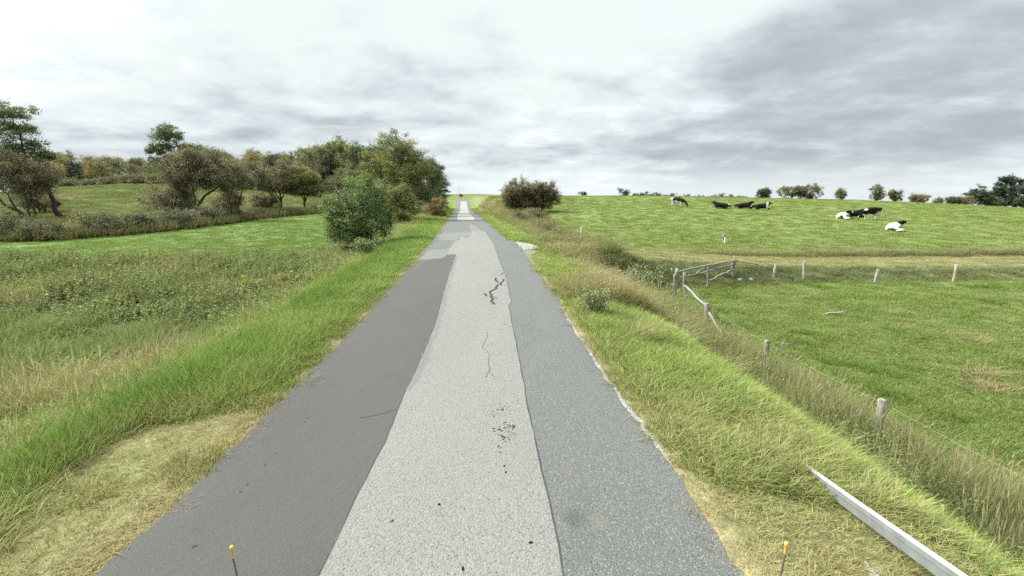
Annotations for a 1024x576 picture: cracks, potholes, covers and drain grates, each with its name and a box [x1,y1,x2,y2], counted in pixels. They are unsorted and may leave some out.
crack [484,270,505,304]
